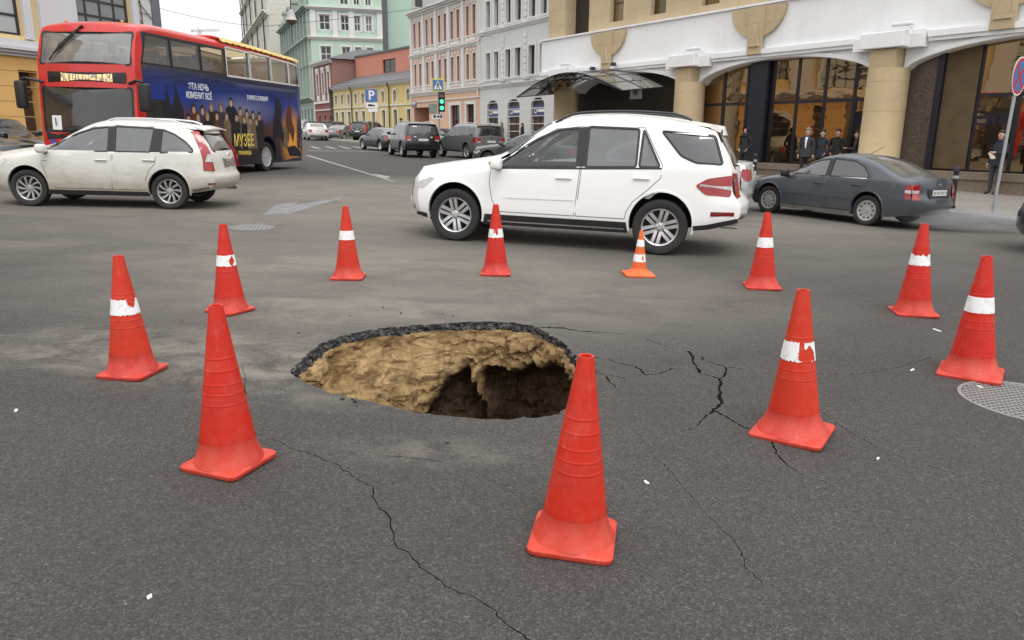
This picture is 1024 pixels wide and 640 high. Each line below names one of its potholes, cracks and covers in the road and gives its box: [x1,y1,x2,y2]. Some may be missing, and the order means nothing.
crack [256,432,530,640]
crack [818,356,932,374]
crack [771,442,847,493]
crack [595,351,767,432]
manhole cover [957,381,1024,420]
crack [626,435,763,582]
